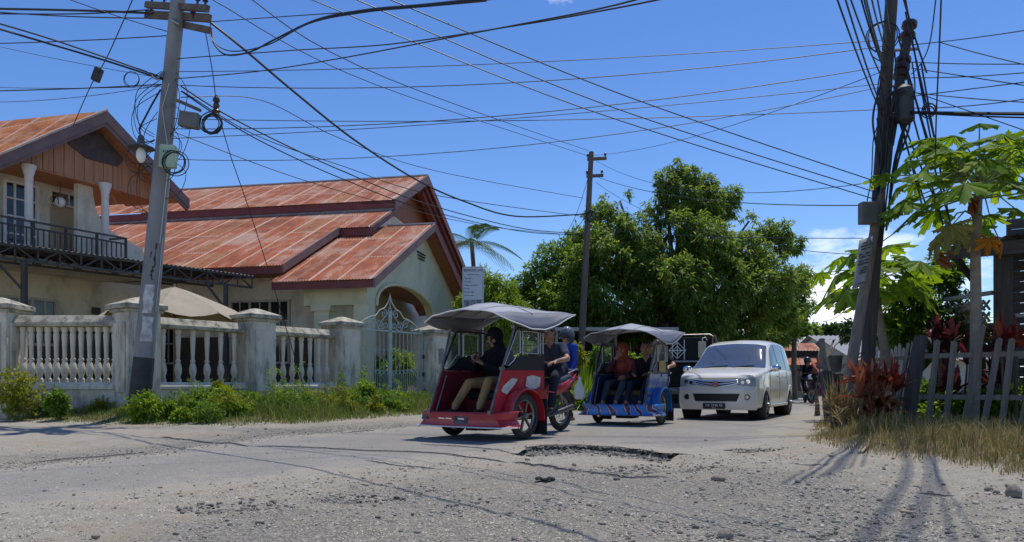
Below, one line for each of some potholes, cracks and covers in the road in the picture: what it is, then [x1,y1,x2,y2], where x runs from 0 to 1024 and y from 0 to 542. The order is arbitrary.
crack [26,430,672,479]
pothole [525,445,672,462]
